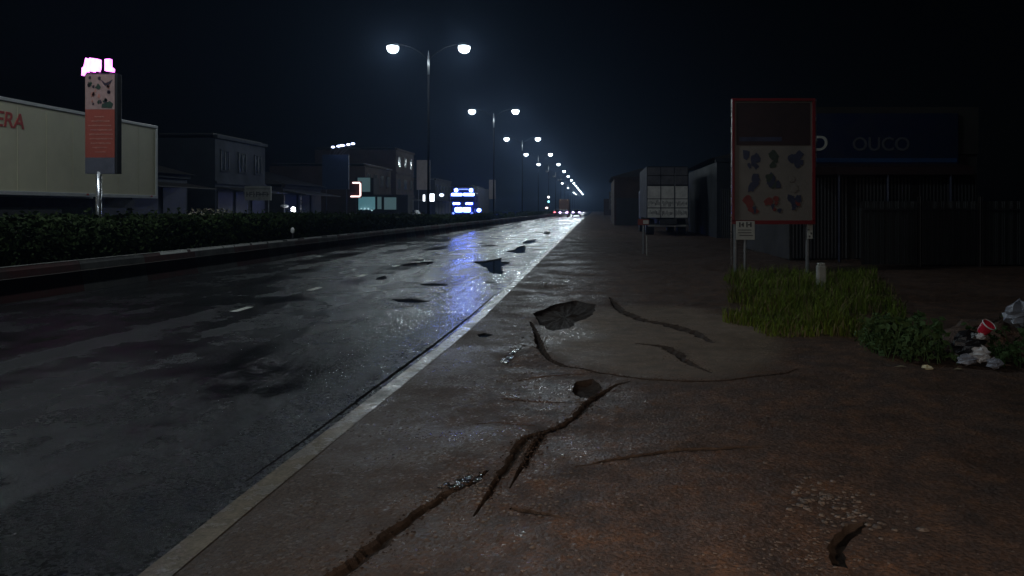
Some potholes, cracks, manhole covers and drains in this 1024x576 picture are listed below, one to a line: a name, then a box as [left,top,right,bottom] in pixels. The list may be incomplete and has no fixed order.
pothole [572,379,602,401]
crack [246,296,797,576]
pothole [533,300,596,331]
pothole [474,258,510,275]
pothole [827,521,868,568]
